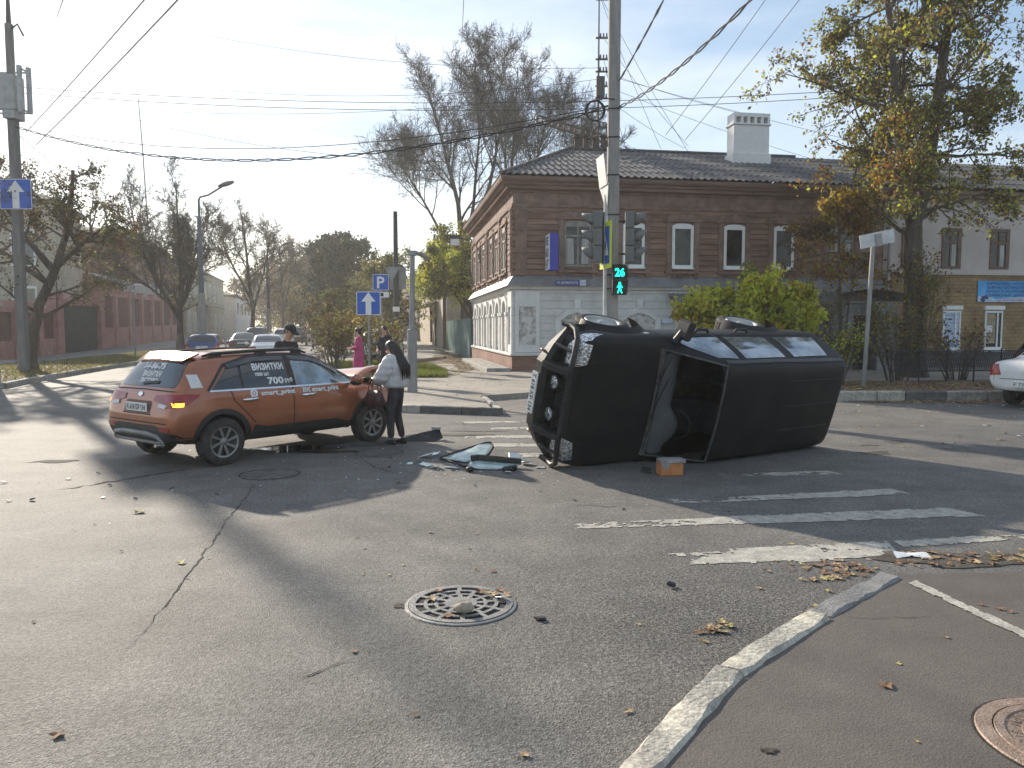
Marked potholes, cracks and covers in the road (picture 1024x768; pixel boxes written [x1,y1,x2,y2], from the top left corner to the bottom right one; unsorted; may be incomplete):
crack [57,467,203,490]
manhole cover [971,697,1024,767]
crack [125,477,291,651]
manhole cover [404,585,517,626]
manhole cover [238,469,300,480]
